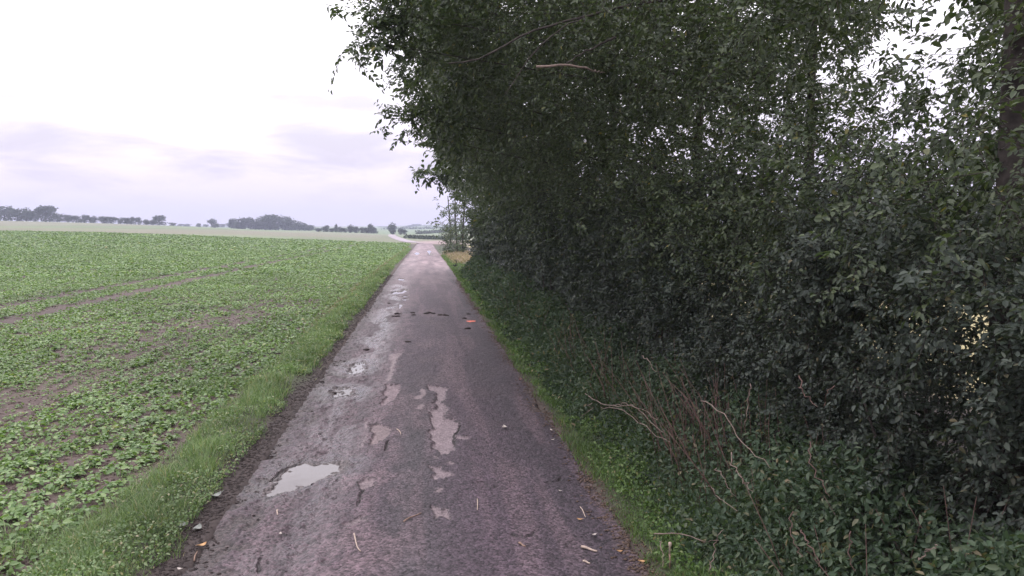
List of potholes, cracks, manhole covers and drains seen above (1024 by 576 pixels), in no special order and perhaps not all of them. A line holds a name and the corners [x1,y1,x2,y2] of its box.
pothole [428,465,455,480]
pothole [426,385,472,455]
pothole [429,505,451,520]
pothole [370,423,392,445]
pothole [380,384,401,405]
crack [356,482,377,506]
